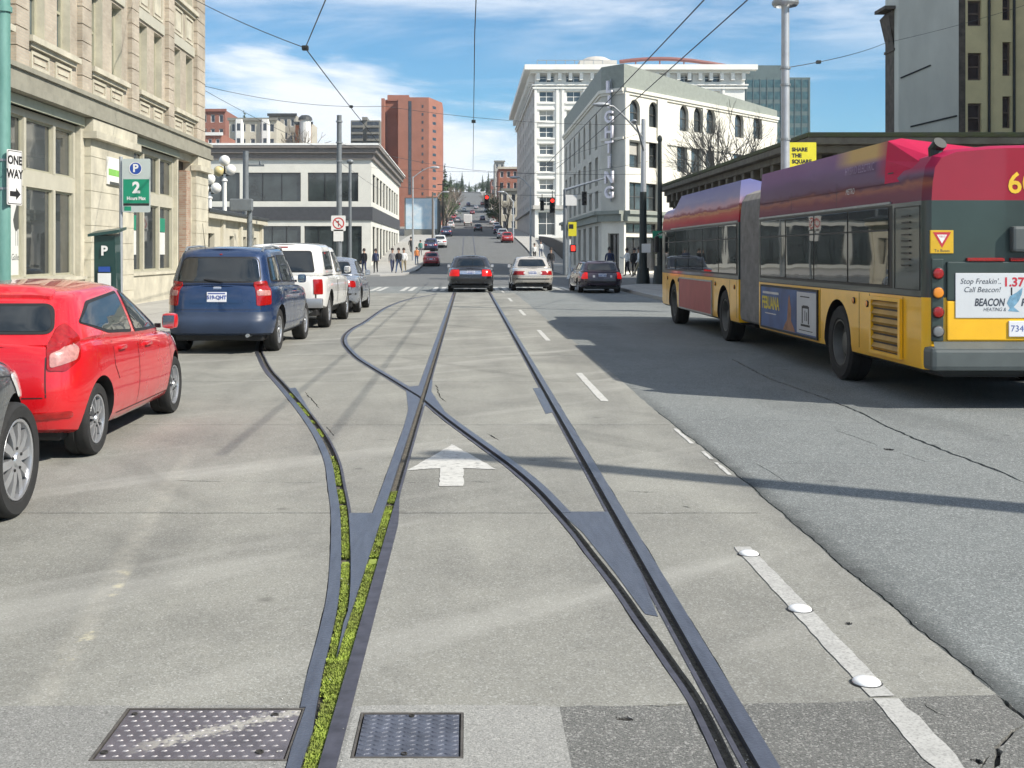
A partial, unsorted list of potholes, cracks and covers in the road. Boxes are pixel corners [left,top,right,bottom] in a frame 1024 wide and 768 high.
crack [994,733,1014,768]
manhole cover [89,708,305,762]
manhole cover [351,712,463,758]
